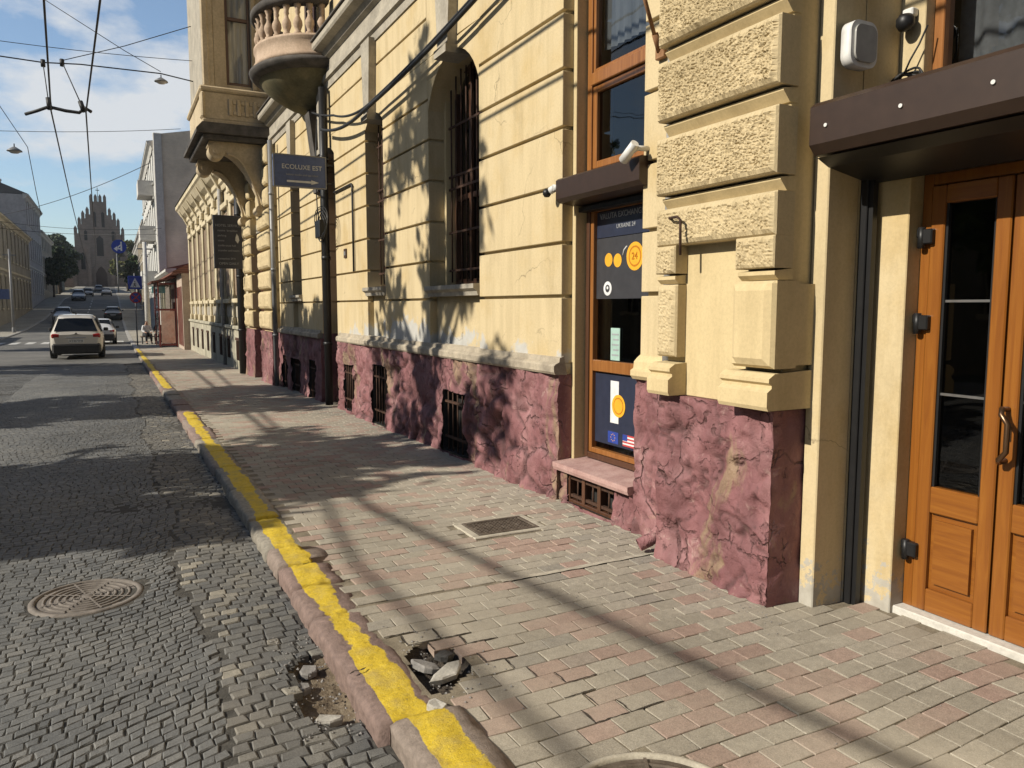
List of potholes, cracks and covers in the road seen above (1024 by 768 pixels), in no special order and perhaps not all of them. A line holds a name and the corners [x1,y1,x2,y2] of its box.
manhole cover [580,752,712,768]
manhole cover [27,578,144,618]
pothole [288,658,358,727]
pothole [404,647,472,695]
